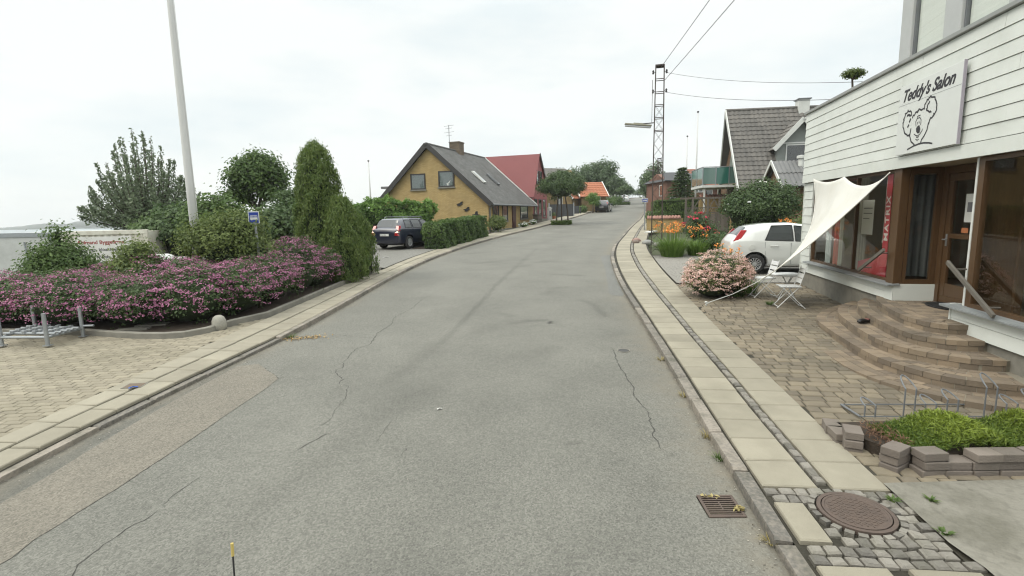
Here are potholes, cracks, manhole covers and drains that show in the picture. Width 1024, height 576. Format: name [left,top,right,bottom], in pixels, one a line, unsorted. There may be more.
crack [72,479,197,576]
crack [294,297,426,452]
manhole cover [816,492,899,538]
drain grate [696,495,747,518]
crack [611,347,661,449]
